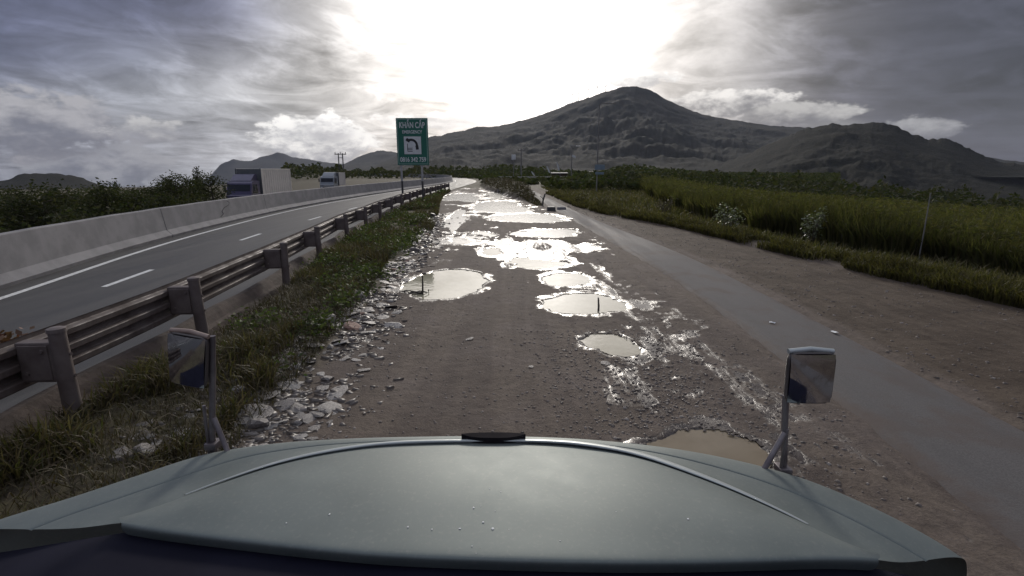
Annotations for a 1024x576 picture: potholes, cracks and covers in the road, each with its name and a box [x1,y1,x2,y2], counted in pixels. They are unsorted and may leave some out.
pothole [389,268,499,302]
pothole [495,255,582,271]
pothole [485,235,521,247]
pothole [515,237,575,260]
pothole [529,291,639,318]
pothole [531,271,602,289]
pothole [621,419,800,476]
pothole [569,330,655,361]
pothole [476,213,575,224]
pothole [491,228,593,240]
pothole [471,246,512,257]
pothole [456,201,536,214]
